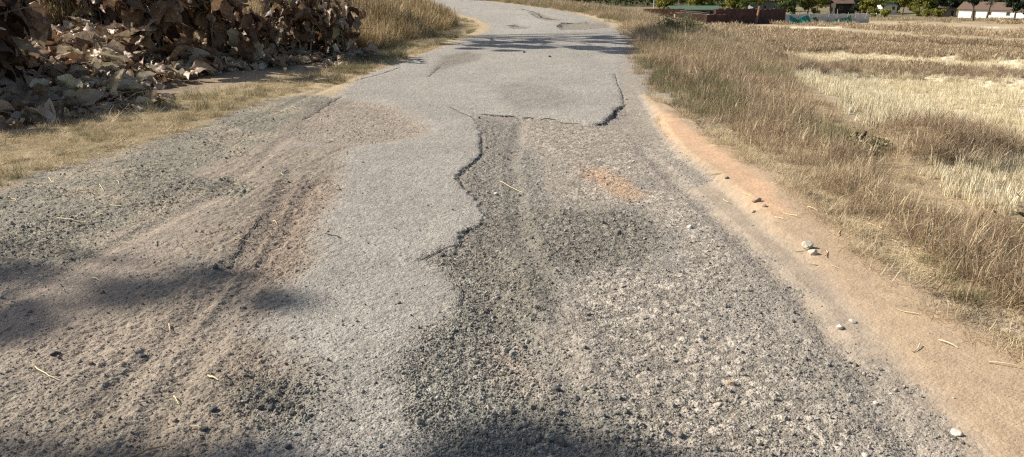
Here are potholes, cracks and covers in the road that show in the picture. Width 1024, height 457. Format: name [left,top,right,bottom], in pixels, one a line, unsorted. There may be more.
pothole [424,205,671,335]
pothole [478,341,549,398]
pothole [455,104,690,217]
